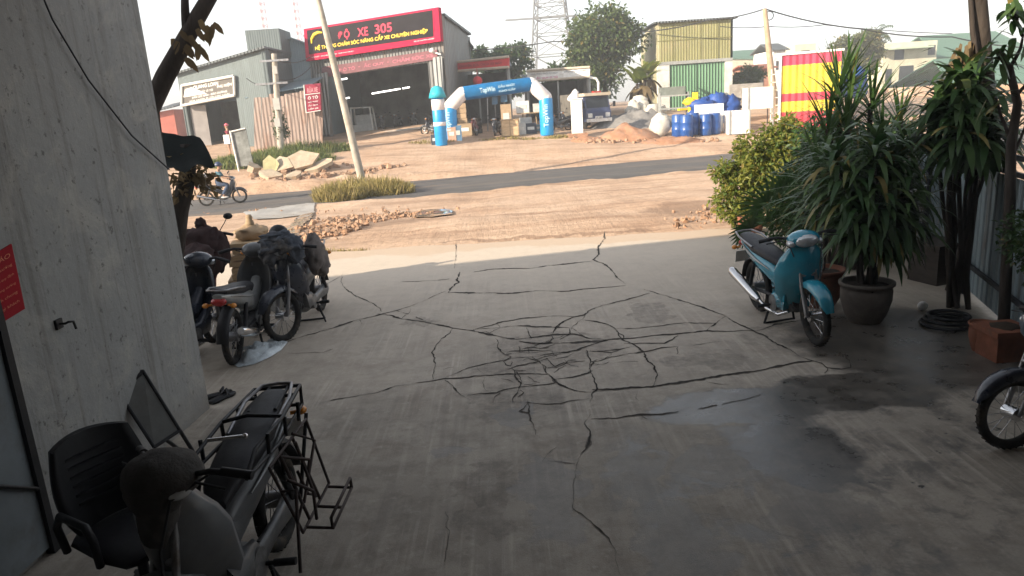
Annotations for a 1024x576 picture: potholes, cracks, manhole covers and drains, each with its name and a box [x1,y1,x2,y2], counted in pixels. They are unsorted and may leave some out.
crack [402,232,626,294]
crack [288,277,442,354]
crack [330,289,851,571]
